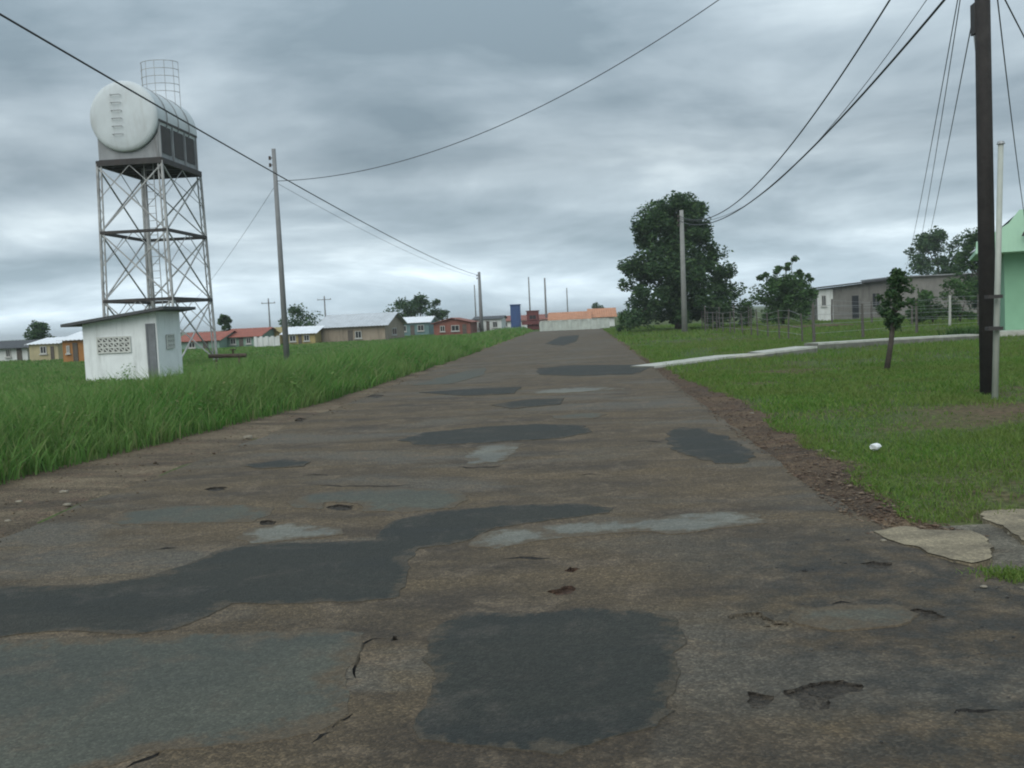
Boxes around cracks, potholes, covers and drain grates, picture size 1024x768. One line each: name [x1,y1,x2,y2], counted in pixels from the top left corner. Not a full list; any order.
pothole [546,586,576,595]
crack [312,714,352,743]
crack [352,638,383,678]
pothole [783,680,864,712]
pothole [747,691,774,710]
pothole [727,612,796,631]
pothole [910,608,947,621]
